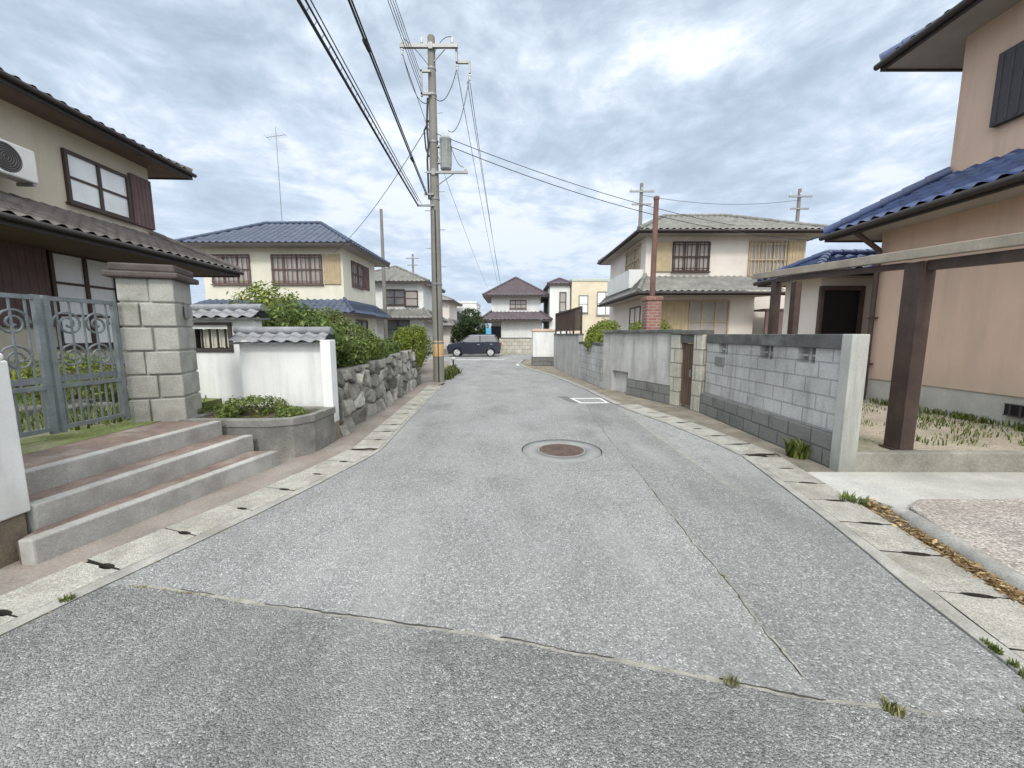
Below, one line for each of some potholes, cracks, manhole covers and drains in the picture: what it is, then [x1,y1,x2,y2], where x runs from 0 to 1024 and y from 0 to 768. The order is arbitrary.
crack [125,404,945,717]
manhole cover [522,440,601,463]
